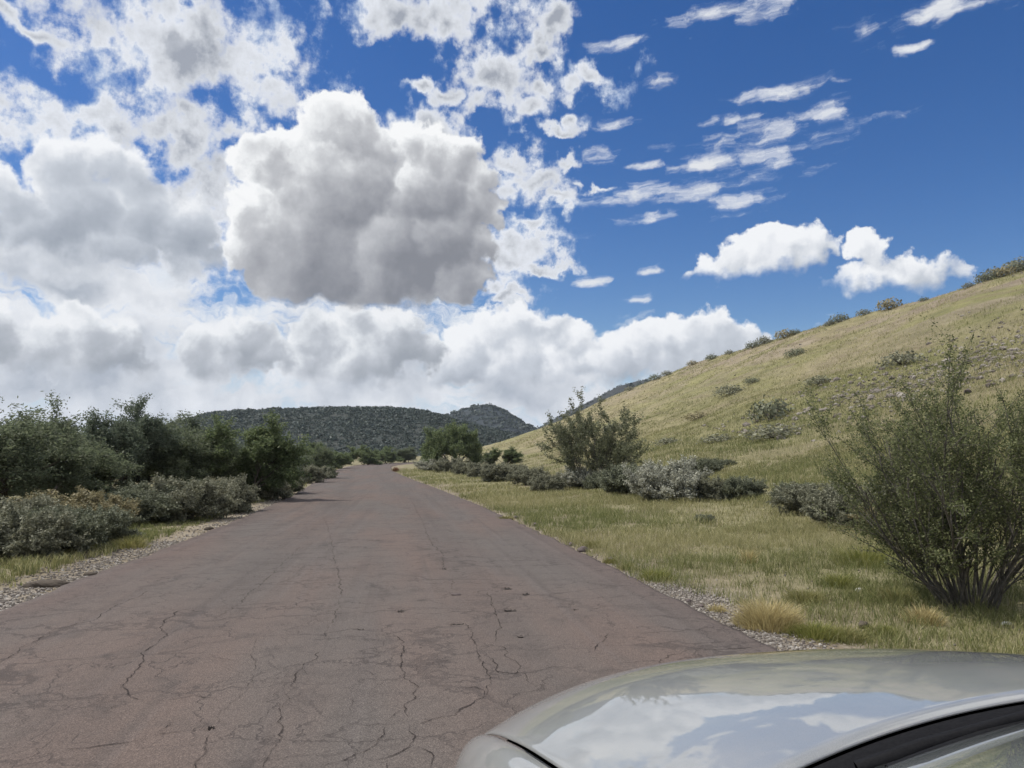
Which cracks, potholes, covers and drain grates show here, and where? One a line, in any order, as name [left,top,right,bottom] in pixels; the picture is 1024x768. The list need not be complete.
crack [262,651,320,768]
crack [325,594,535,768]
crack [101,610,257,713]
